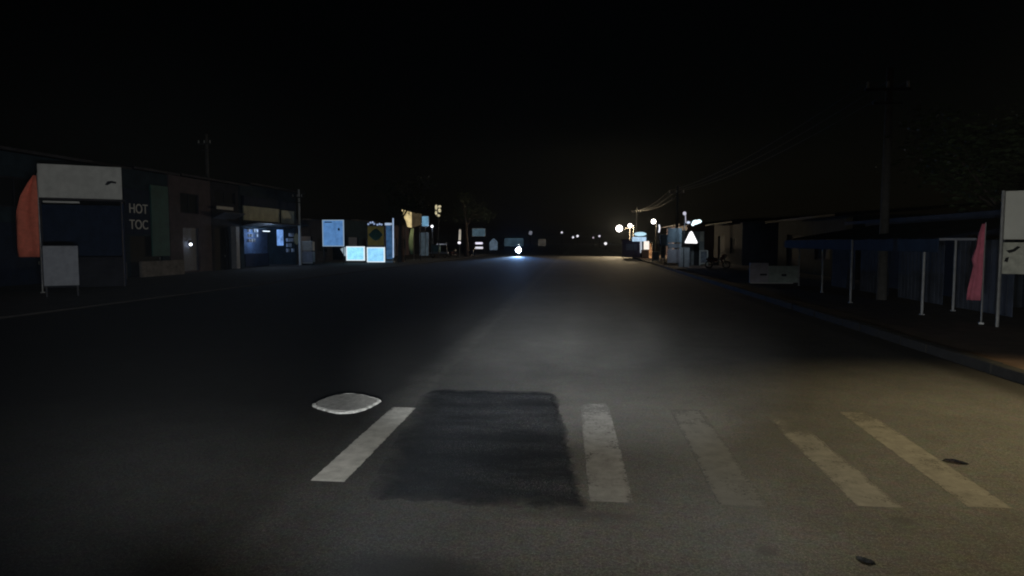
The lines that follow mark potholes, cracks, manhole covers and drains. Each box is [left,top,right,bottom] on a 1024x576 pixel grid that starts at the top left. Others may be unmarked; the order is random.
manhole cover [312,393,381,414]
pothole [856,556,876,566]
